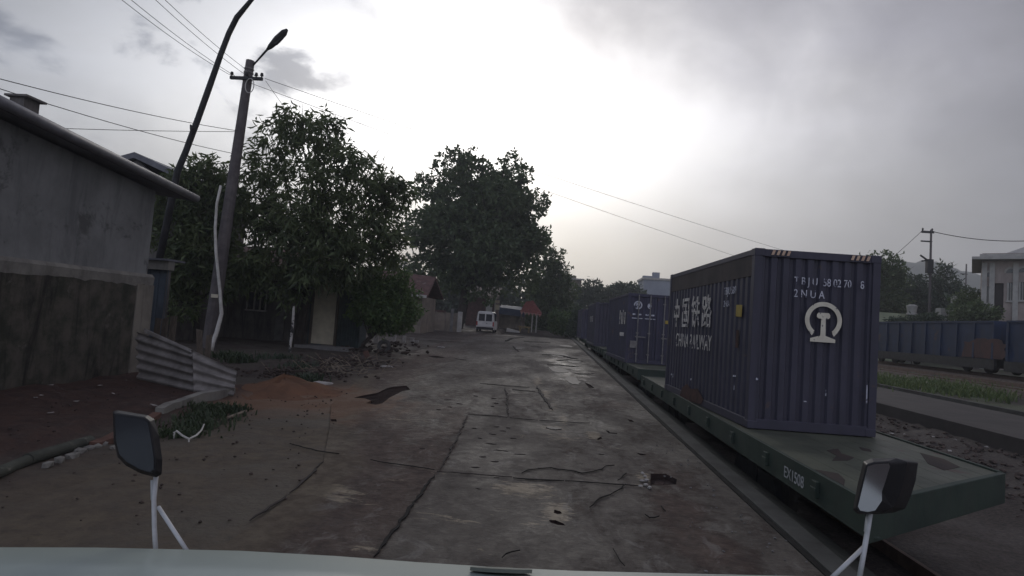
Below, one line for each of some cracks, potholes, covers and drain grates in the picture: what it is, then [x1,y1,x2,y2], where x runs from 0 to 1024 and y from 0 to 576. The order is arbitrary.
pothole [354,386,410,405]
crack [249,443,339,521]
crack [370,383,638,557]
